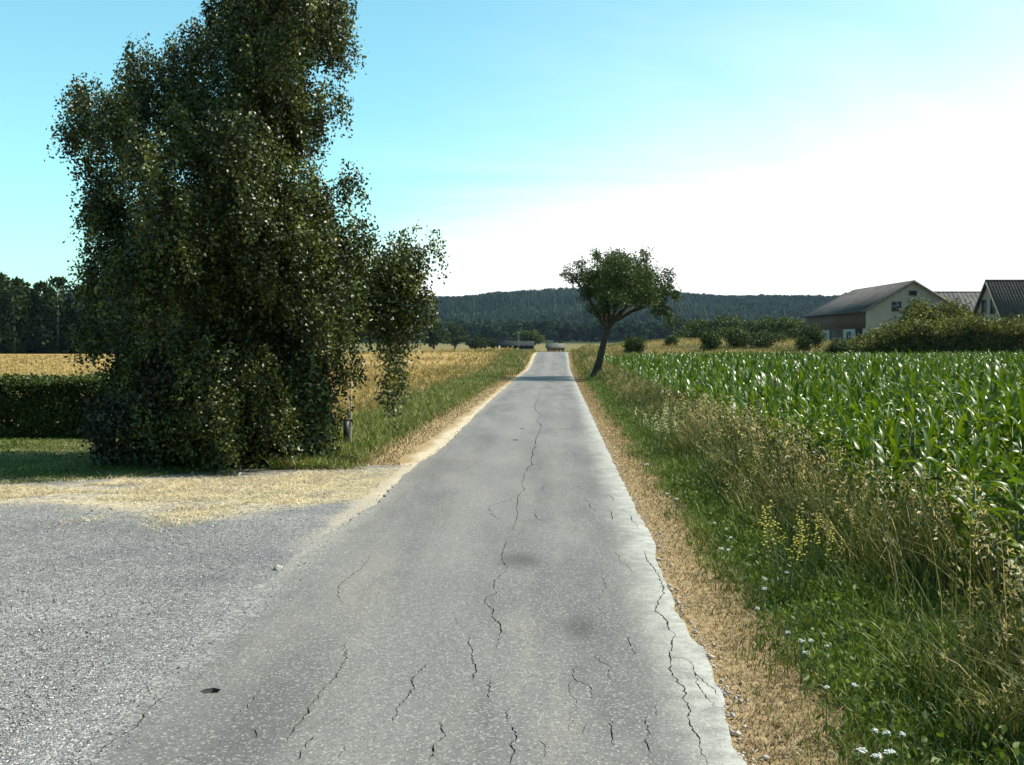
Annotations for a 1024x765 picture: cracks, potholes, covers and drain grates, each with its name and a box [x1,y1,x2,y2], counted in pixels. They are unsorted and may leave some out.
crack [391,664,427,720]
crack [483,544,508,647]
crack [429,722,446,761]
crack [488,393,546,531]
crack [568,654,612,737]
crack [615,551,717,765]
crack [94,682,175,757]
crack [455,618,517,764]
